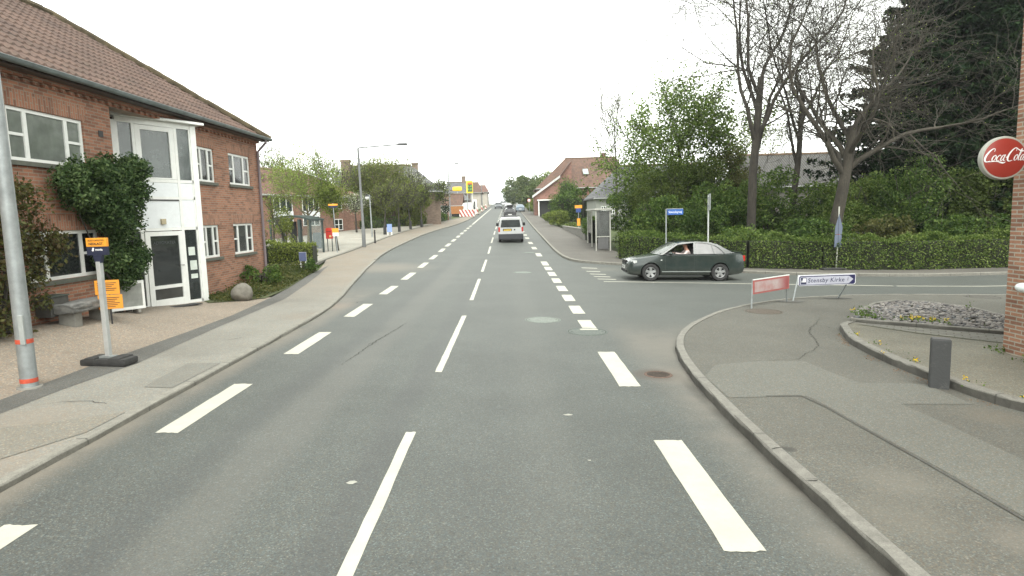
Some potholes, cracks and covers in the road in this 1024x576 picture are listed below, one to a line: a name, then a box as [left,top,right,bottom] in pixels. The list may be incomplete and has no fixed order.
manhole cover [566,328,608,336]
